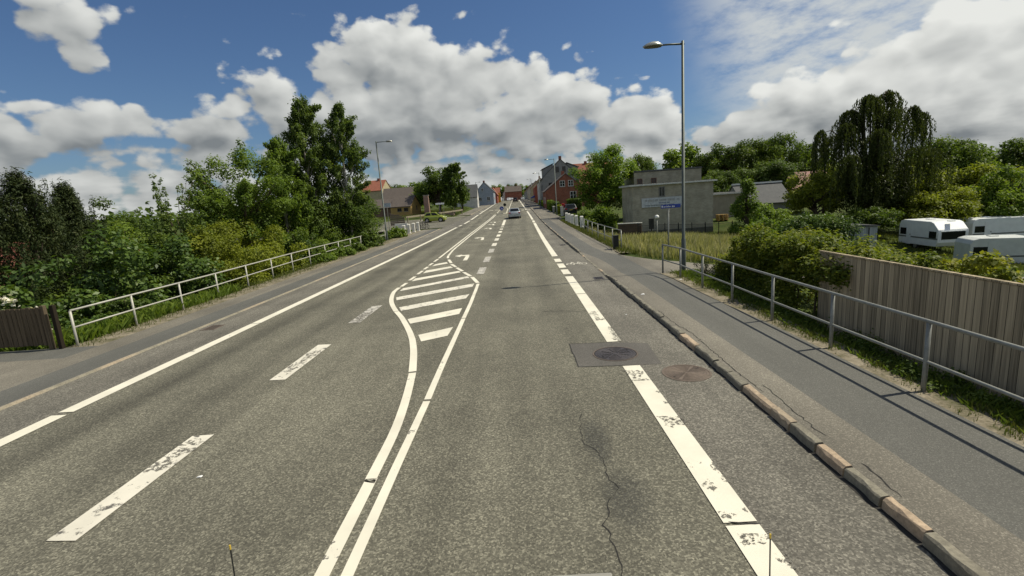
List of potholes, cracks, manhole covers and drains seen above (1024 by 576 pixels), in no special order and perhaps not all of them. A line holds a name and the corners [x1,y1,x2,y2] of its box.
manhole cover [593,347,638,361]
crack [579,414,623,576]
manhole cover [662,364,712,382]
